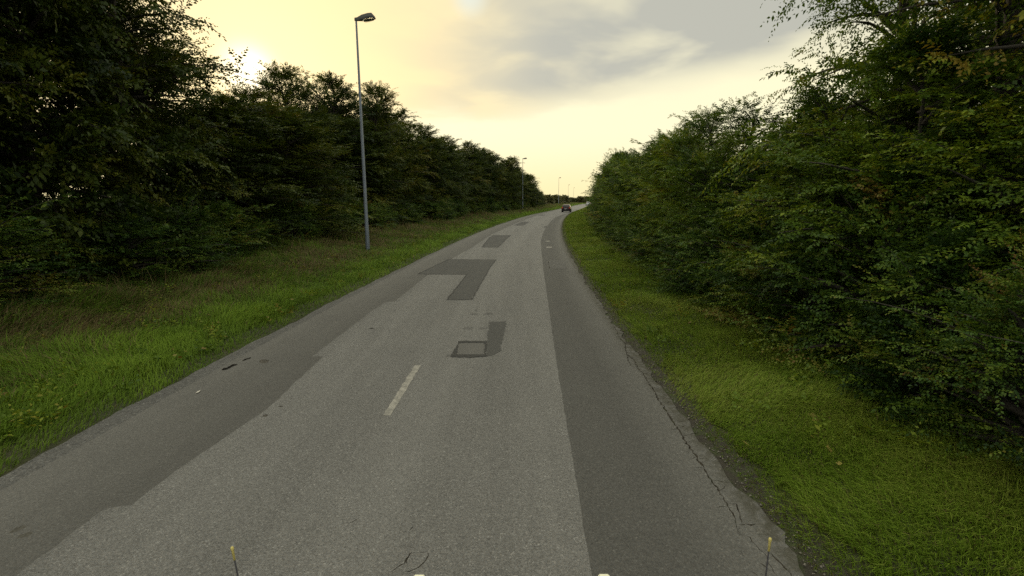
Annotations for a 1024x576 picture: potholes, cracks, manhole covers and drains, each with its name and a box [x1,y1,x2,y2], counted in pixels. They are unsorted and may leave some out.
crack [611,324,792,576]
crack [391,552,429,572]
